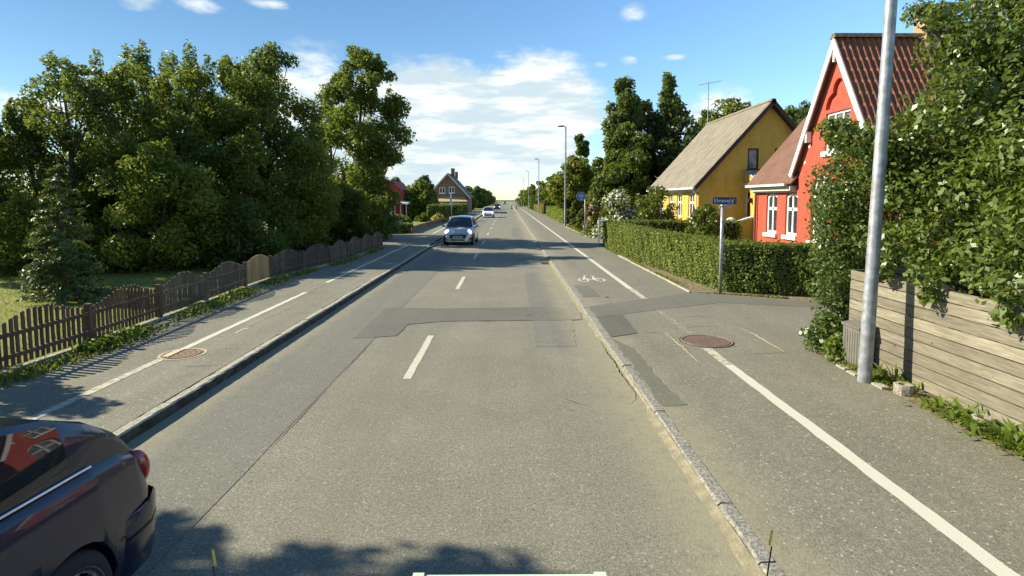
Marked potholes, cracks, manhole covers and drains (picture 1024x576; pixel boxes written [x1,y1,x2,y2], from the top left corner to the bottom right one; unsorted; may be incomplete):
manhole cover [157,348,207,360]
manhole cover [679,334,734,348]
crack [601,342,637,403]
